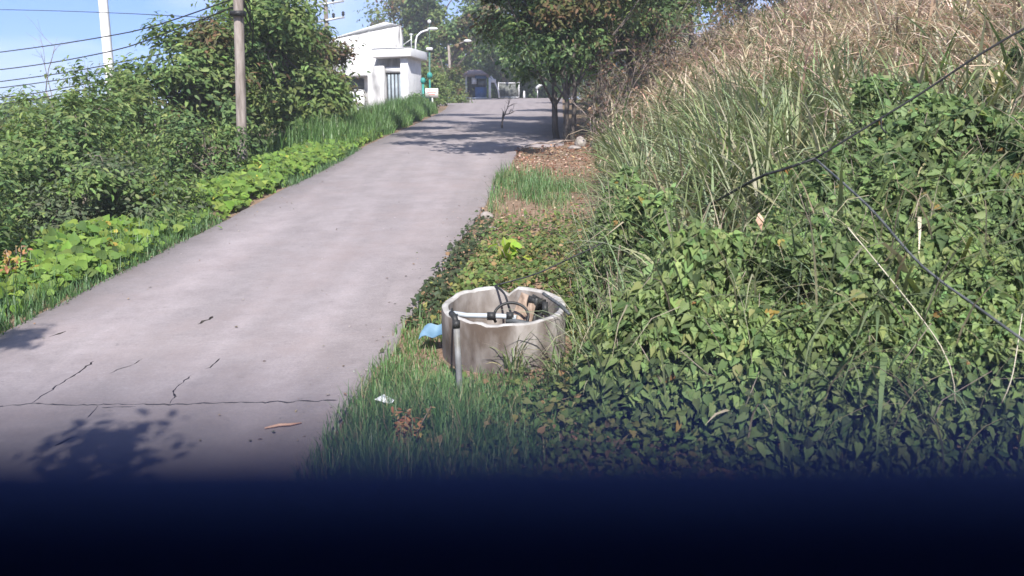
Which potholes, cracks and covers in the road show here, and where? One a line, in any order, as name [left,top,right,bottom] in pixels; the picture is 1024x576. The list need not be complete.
crack [31,362,92,404]
